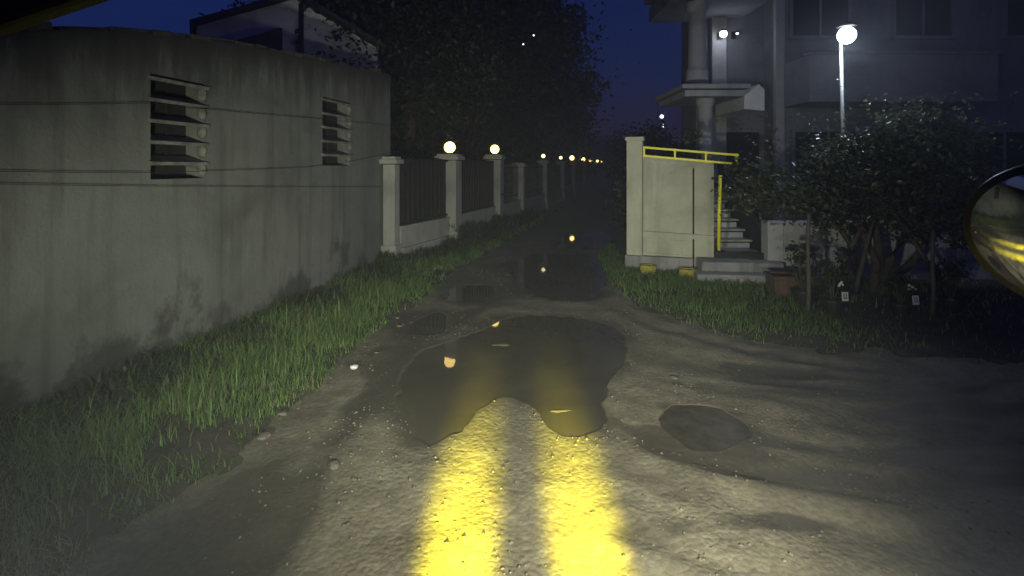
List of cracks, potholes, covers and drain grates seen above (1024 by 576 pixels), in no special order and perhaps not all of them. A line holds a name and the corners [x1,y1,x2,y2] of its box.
pothole [509,252,609,301]
pothole [393,314,628,446]
pothole [549,231,616,249]
pothole [658,403,753,452]
pothole [440,284,497,303]
